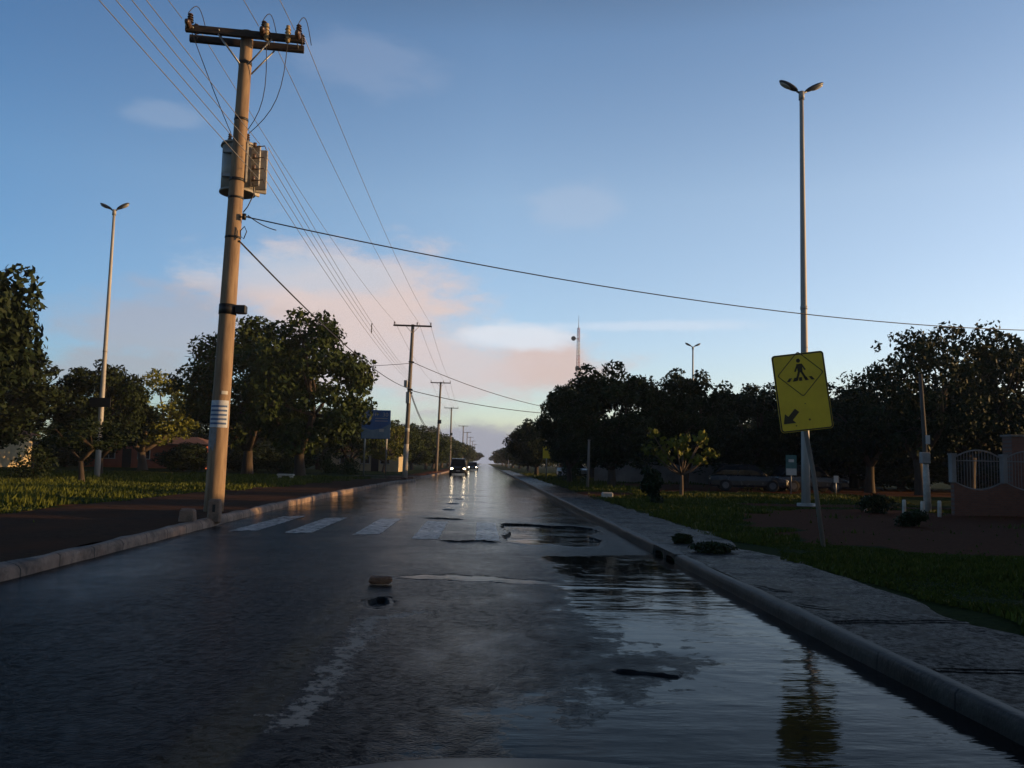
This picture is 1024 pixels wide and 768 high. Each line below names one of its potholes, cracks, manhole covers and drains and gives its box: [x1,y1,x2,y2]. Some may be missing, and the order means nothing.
pothole [362,597,394,609]
pothole [610,668,685,678]
drain grate [653,544,686,561]
pothole [498,523,607,548]
